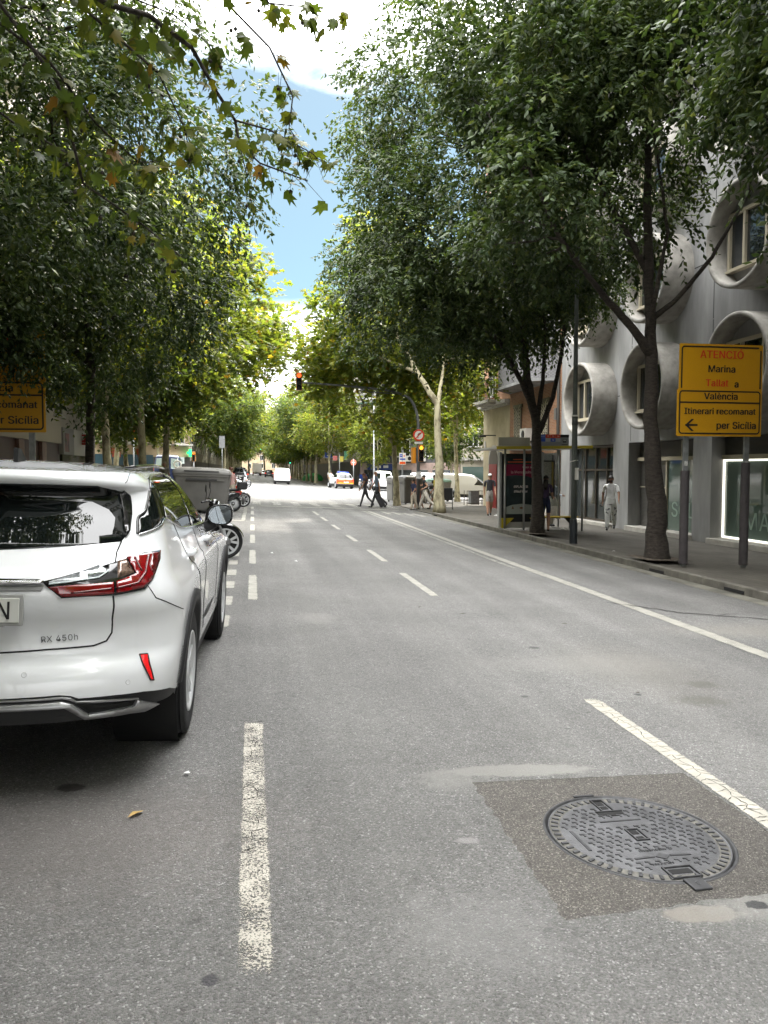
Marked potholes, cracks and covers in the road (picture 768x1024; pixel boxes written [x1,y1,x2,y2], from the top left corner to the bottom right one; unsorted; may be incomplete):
manhole cover [543,794,739,891]
